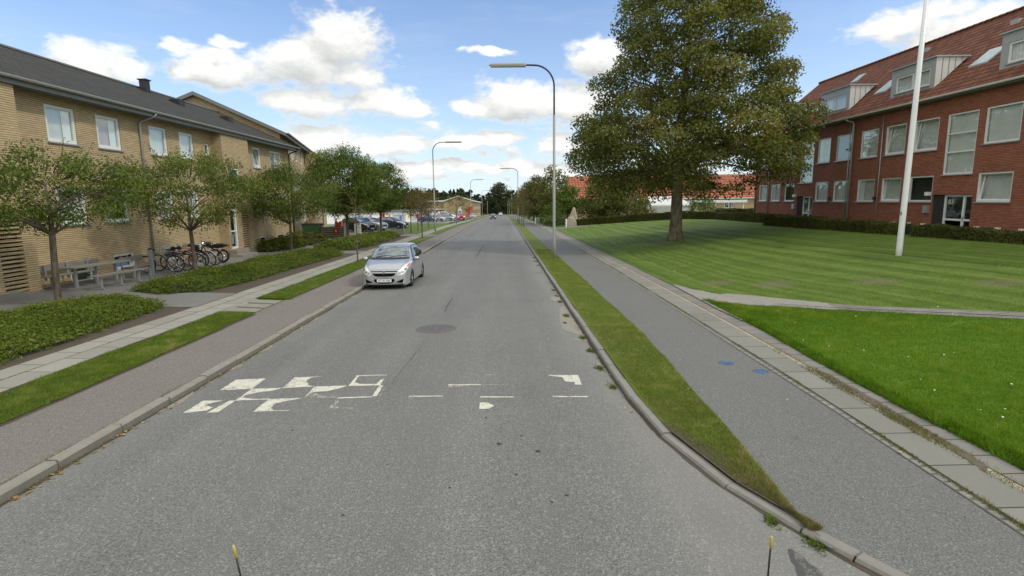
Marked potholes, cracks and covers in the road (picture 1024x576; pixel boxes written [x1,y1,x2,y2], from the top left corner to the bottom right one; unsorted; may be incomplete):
manhole cover [416,324,456,333]
